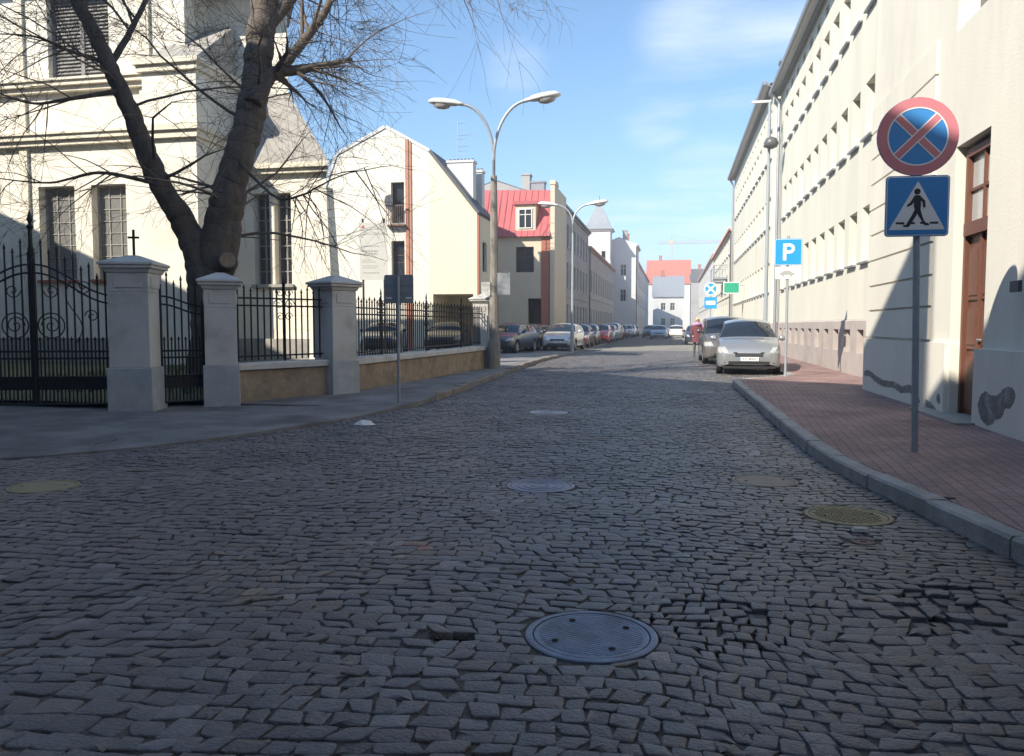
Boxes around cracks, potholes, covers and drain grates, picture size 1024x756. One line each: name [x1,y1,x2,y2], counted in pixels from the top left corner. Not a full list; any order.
manhole cover [525,611,658,665]
manhole cover [5,480,81,494]
manhole cover [731,474,799,488]
manhole cover [506,479,575,494]
manhole cover [804,506,894,527]
